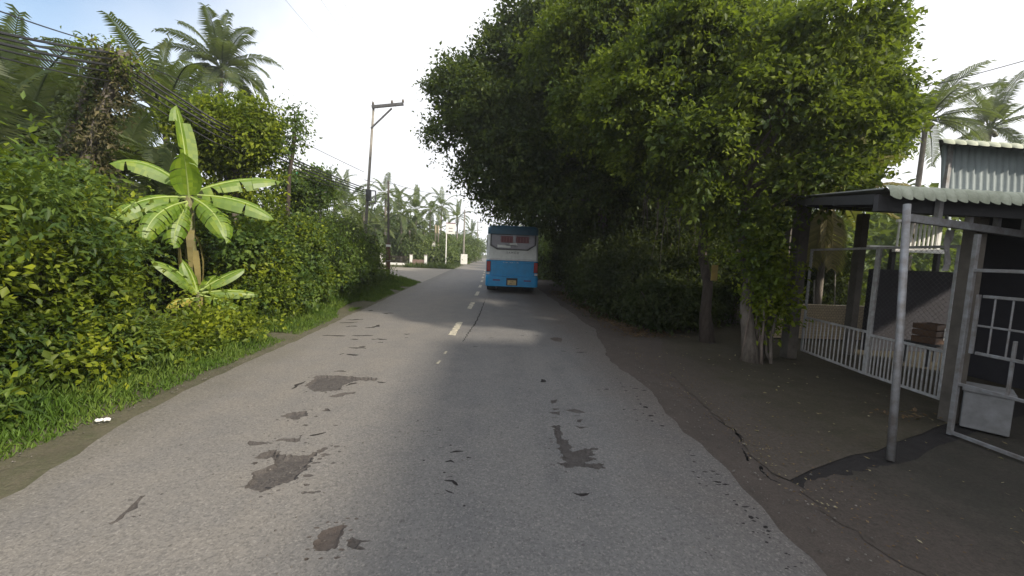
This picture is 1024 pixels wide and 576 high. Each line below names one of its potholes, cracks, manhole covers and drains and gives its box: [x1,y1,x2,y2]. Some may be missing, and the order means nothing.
crack [707,416,780,483]
